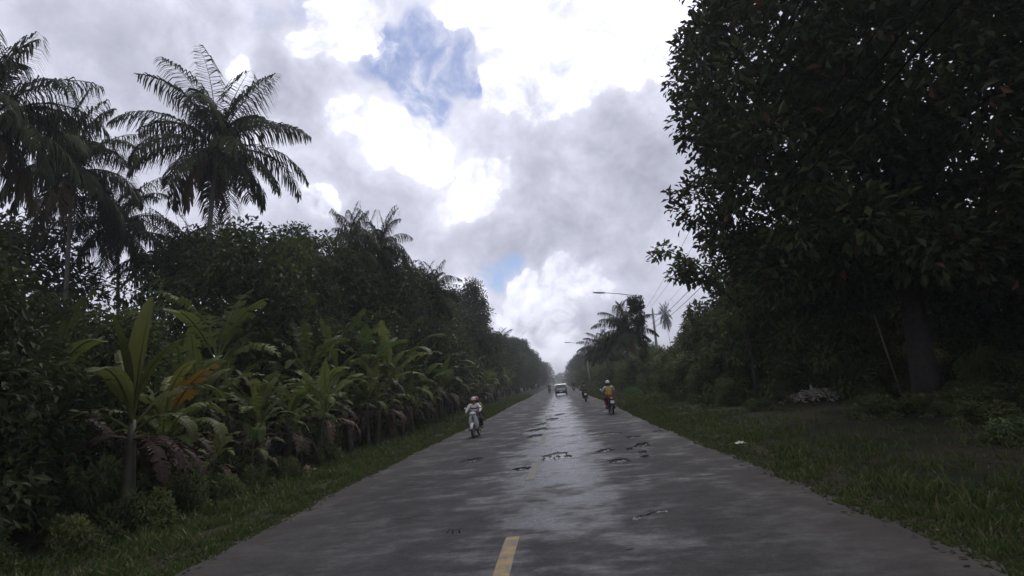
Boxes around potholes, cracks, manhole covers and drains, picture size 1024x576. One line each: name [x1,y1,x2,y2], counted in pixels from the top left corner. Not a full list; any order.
pothole [541,451,573,461]
